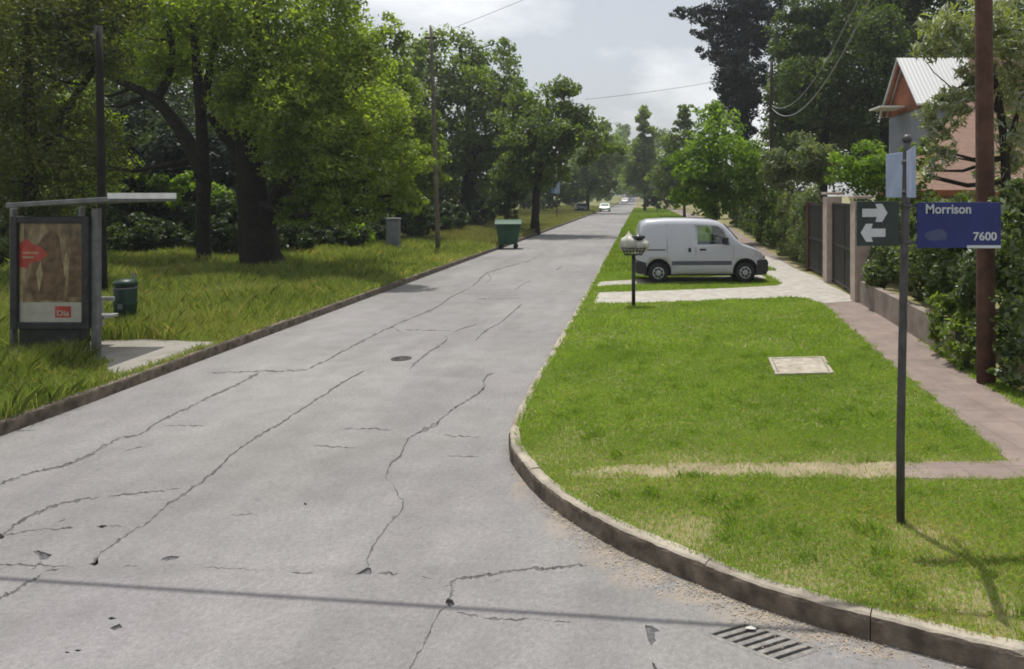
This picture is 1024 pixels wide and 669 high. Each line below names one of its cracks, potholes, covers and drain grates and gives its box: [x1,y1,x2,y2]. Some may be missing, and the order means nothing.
utility cover [768,356,833,376]
drain grate [704,621,825,664]
crack [0,253,586,669]
pothole [645,625,659,645]
